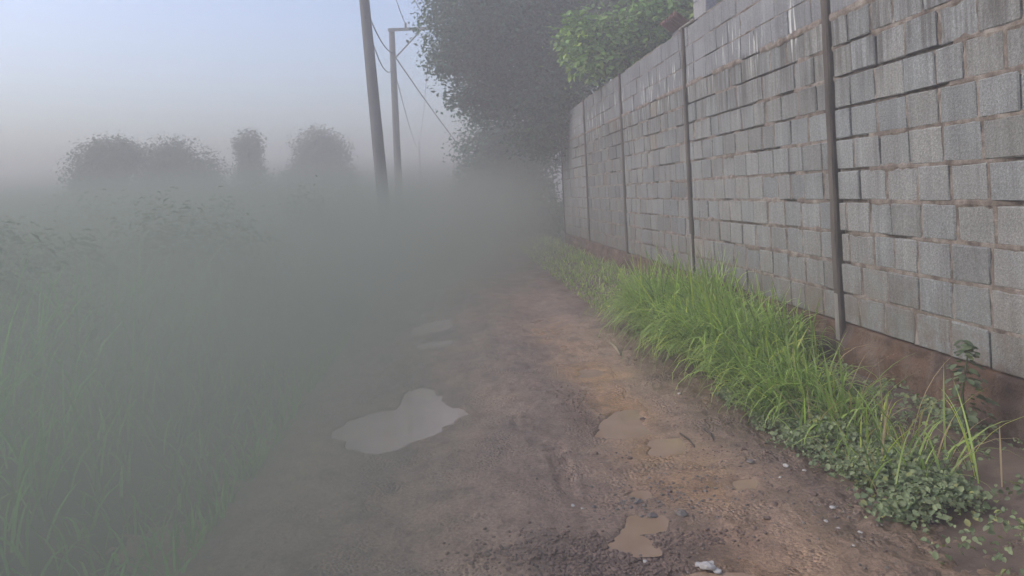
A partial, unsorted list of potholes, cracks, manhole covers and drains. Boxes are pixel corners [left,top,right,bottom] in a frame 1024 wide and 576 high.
pothole [410,318,455,336]
pothole [604,513,672,558]
pothole [330,388,470,454]
pothole [592,409,657,439]
pothole [644,437,688,457]
pothole [413,341,453,349]
